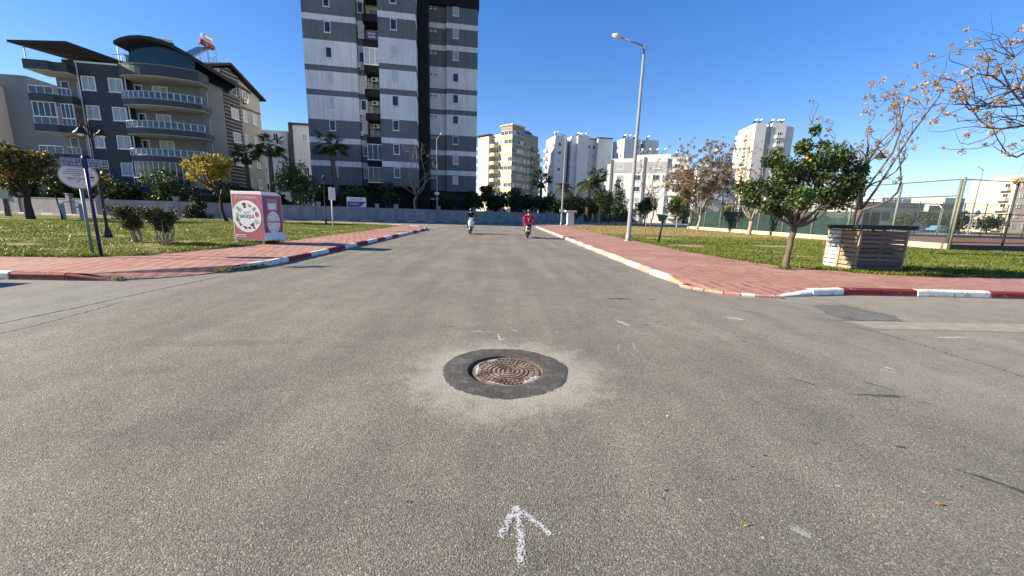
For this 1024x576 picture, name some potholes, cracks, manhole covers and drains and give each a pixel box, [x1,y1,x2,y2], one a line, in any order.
manhole cover [443,349,568,399]
